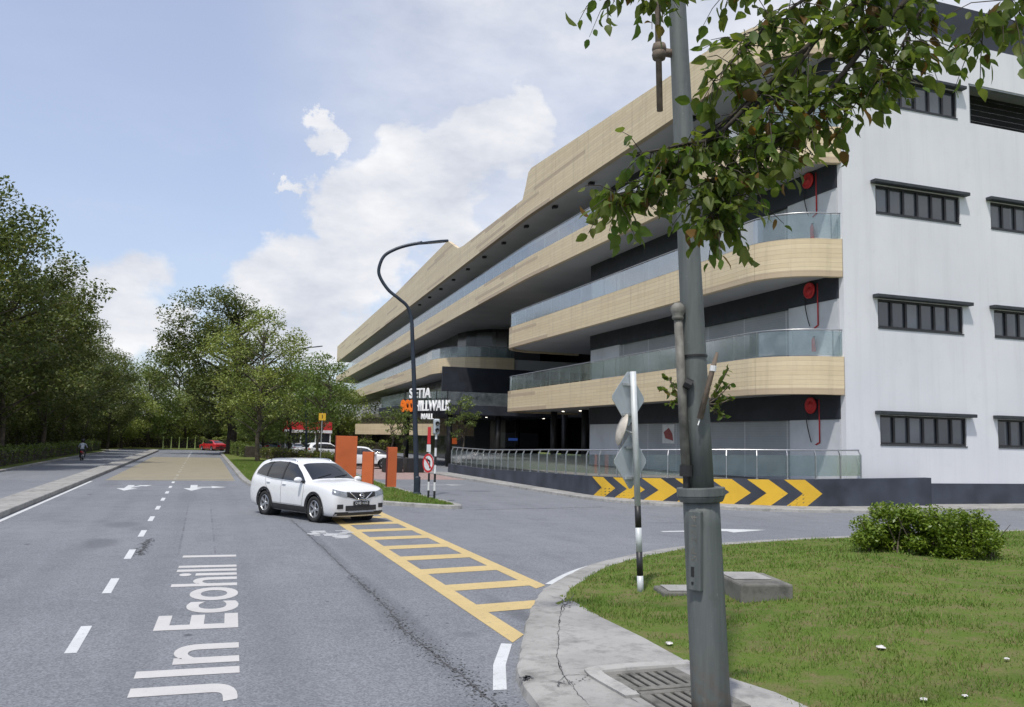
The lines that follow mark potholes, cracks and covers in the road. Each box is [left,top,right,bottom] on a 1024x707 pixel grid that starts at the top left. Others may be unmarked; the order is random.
drain grate [584,660,751,707]
crack [519,606,639,703]
